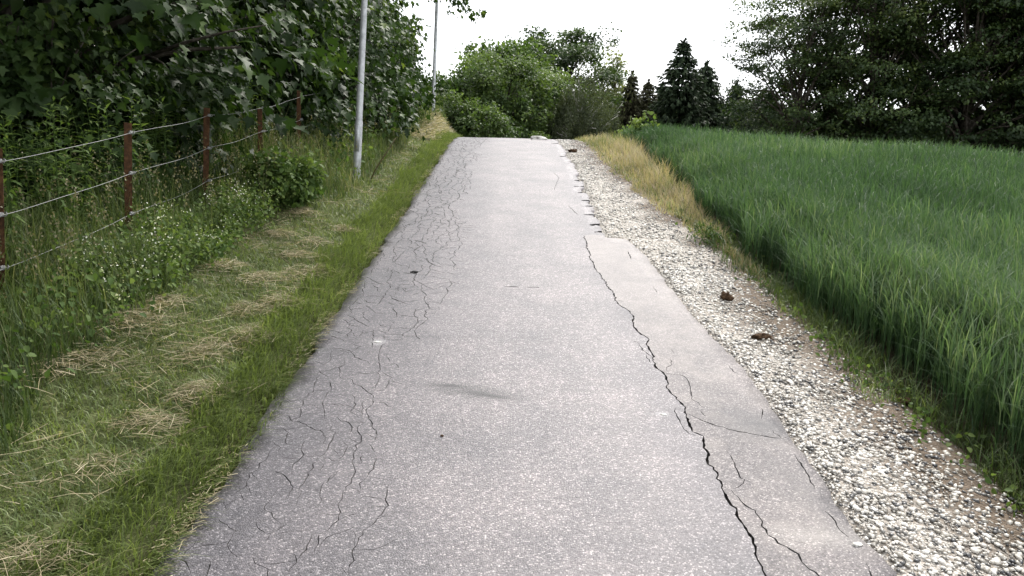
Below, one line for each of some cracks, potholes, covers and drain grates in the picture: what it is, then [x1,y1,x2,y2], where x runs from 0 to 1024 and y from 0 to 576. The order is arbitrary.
crack [583,236,848,576]
